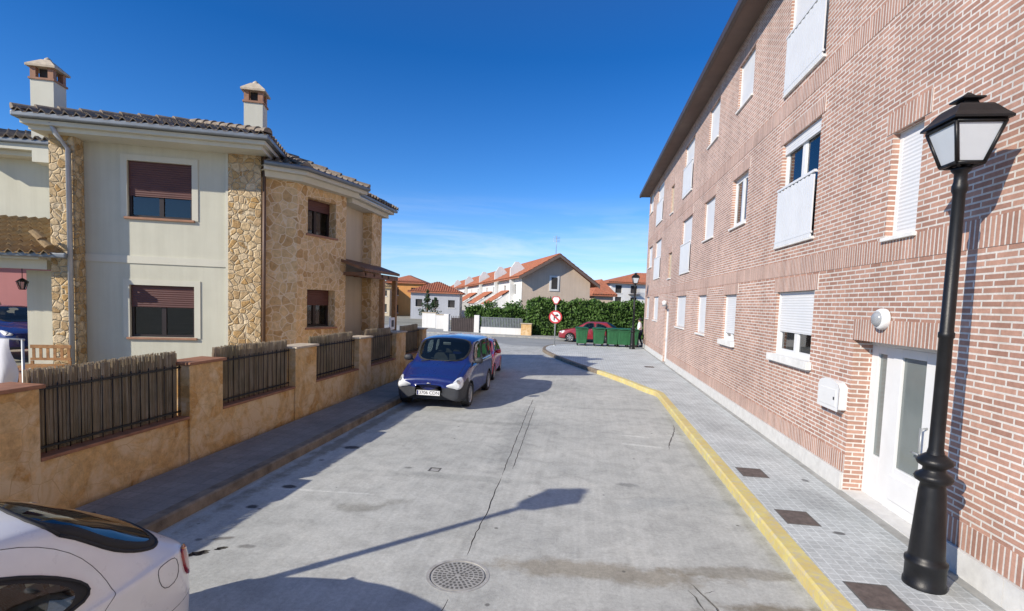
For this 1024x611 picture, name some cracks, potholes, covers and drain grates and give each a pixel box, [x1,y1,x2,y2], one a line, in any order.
utility cover [735,467,769,478]
utility cover [774,509,822,527]
utility cover [842,581,913,611]
manhole cover [426,559,489,593]
crack [441,401,535,611]
